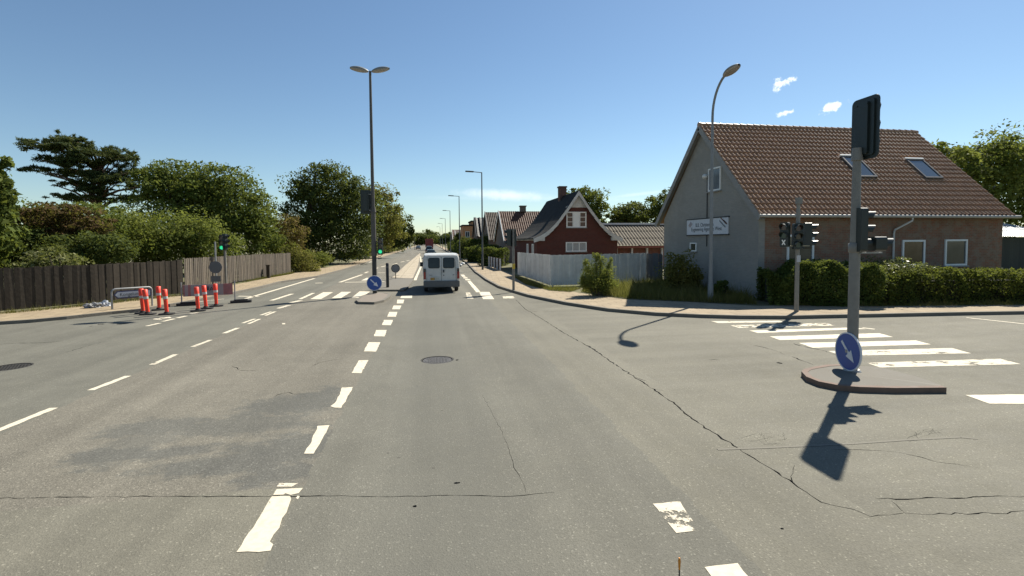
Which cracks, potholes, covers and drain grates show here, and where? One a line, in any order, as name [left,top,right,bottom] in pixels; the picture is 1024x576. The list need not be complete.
manhole cover [0,363,34,371]
manhole cover [421,356,454,364]
crack [517,301,1024,517]
crack [9,397,553,499]
